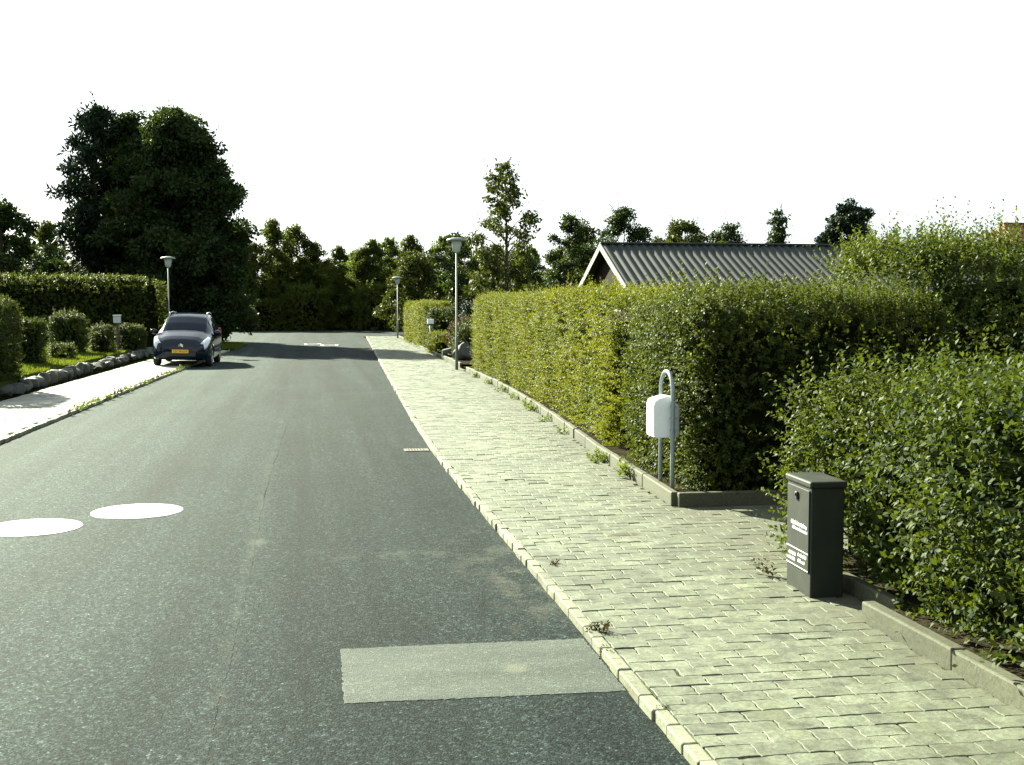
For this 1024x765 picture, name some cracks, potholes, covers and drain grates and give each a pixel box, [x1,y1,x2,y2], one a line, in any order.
crack [205,428,286,765]
